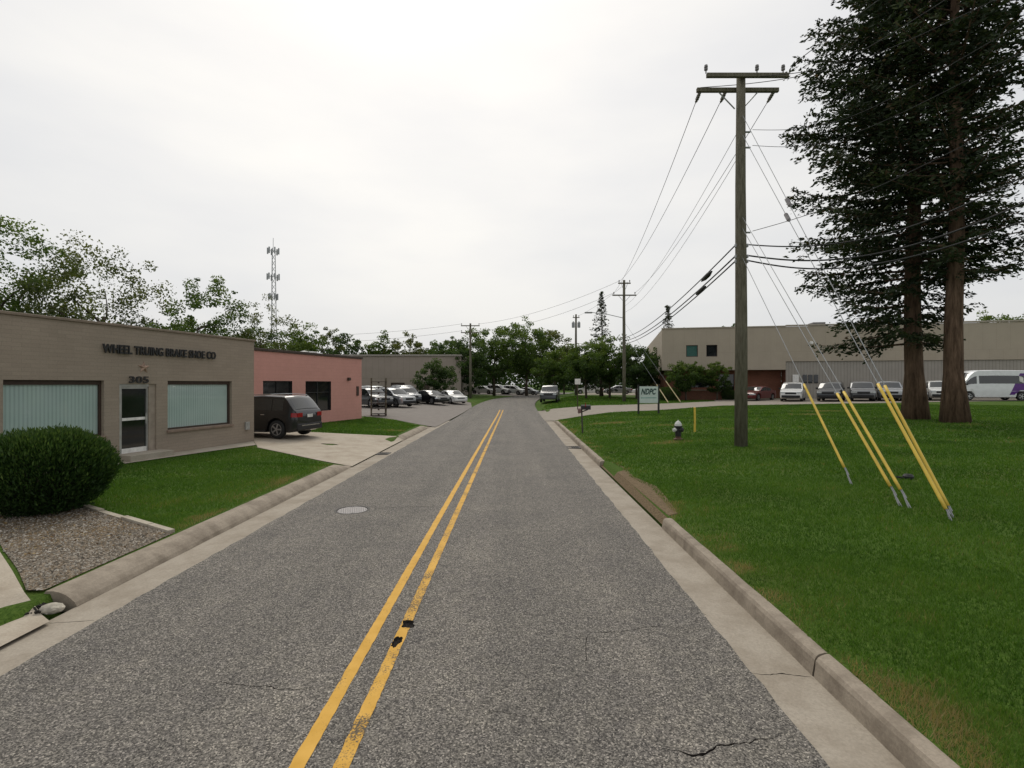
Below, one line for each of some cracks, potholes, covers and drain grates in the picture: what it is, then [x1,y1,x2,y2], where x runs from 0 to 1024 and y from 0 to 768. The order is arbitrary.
crack [670,735,782,757]
manhole cover [334,506,370,514]
